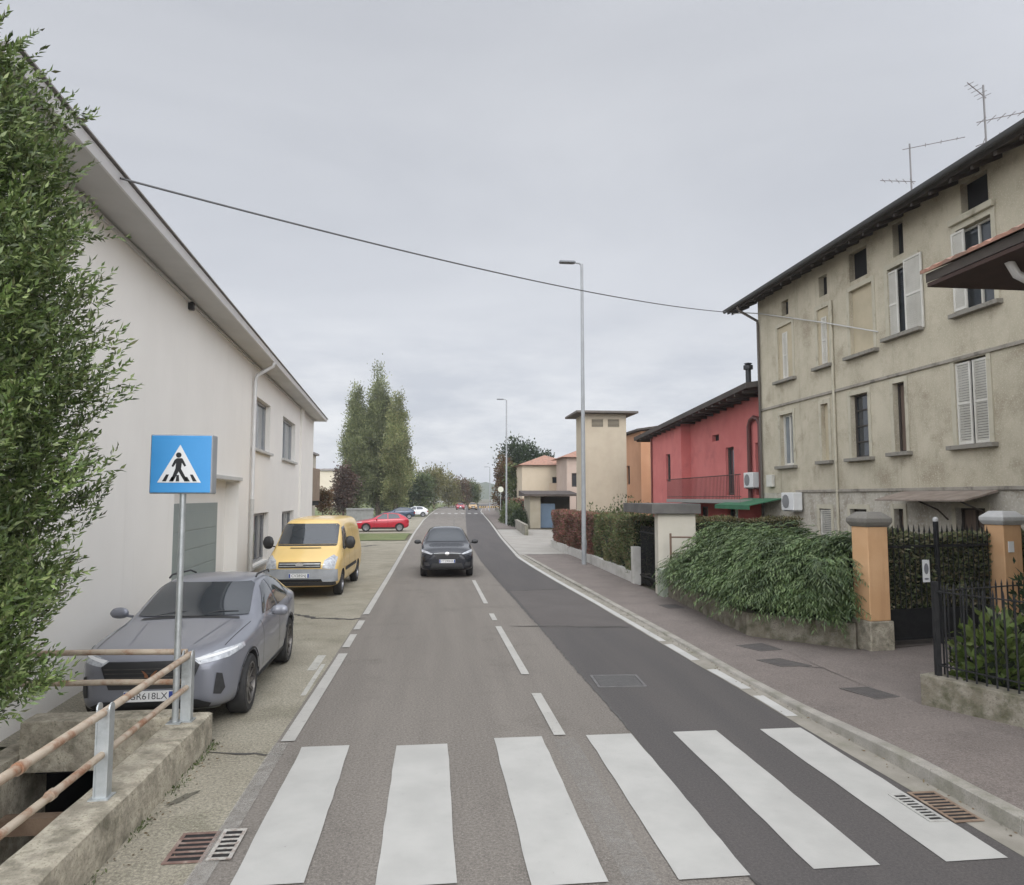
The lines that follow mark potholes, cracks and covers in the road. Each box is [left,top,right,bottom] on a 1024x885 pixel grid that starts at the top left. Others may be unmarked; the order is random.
manhole cover [840,686,900,699]
manhole cover [736,643,782,651]
drain grate [161,831,221,865]
drain grate [907,791,985,823]
drain grate [888,793,949,822]
manhole cover [758,658,812,667]
drain grate [205,828,248,861]
manhole cover [590,674,647,687]
